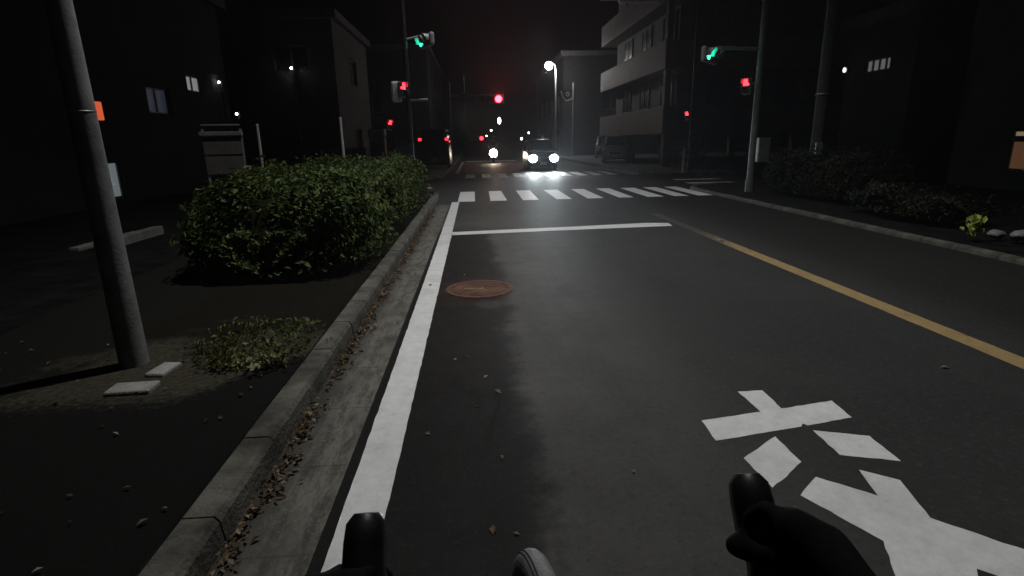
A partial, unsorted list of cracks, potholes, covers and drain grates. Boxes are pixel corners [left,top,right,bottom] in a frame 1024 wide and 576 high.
manhole cover [446,280,514,298]
